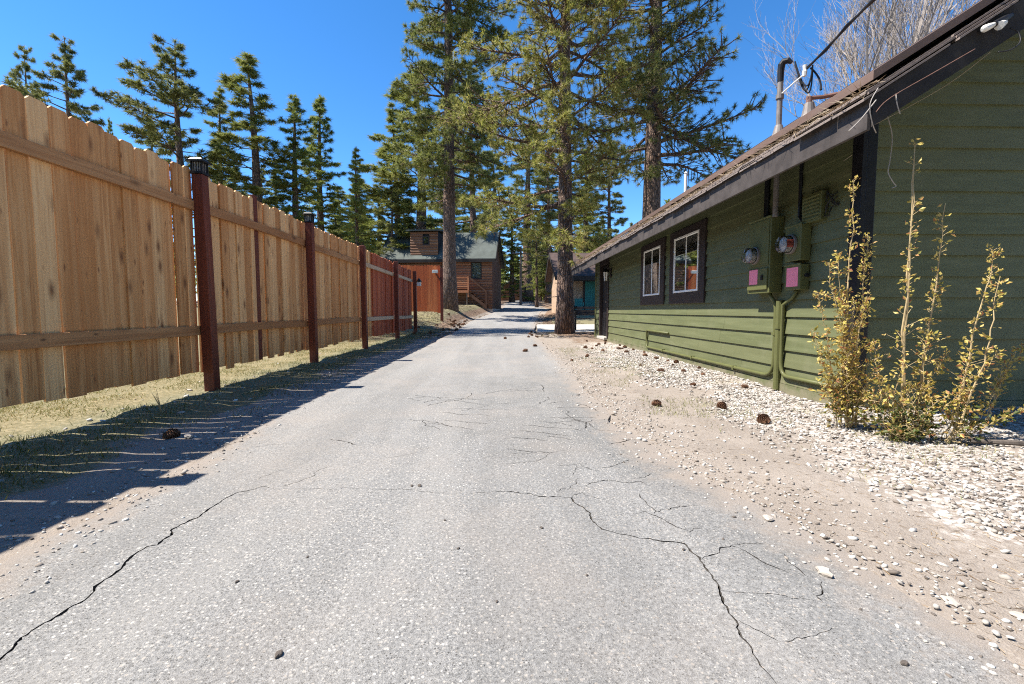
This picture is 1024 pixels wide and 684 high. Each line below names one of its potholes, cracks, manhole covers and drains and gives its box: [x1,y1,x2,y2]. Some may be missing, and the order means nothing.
crack [0,470,319,660]
crack [507,460,830,678]
crack [331,386,628,456]
